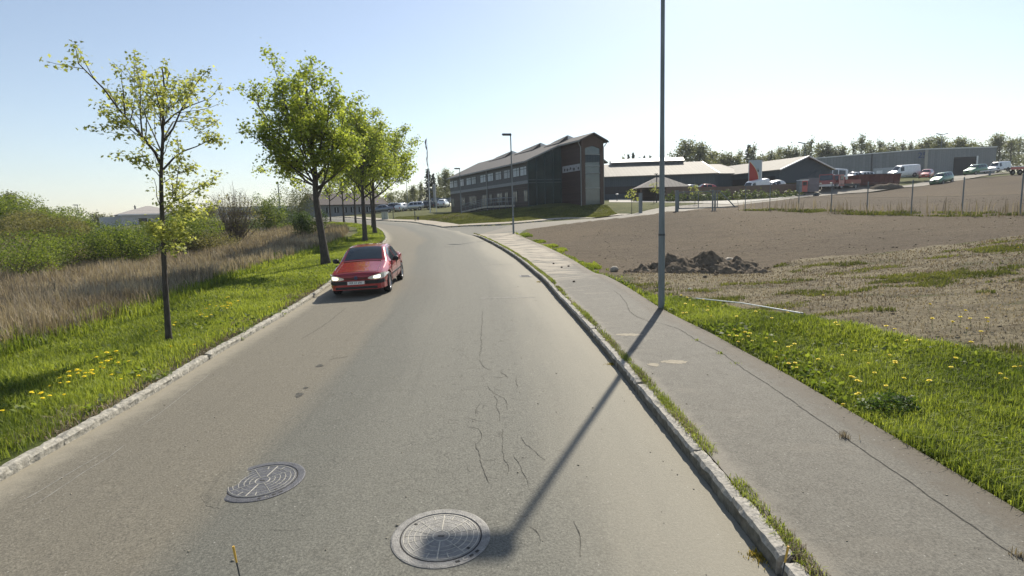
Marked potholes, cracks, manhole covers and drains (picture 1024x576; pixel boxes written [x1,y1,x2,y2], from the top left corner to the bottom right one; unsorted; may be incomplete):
manhole cover [224,462,306,503]
crack [466,311,545,487]
manhole cover [390,509,490,569]
